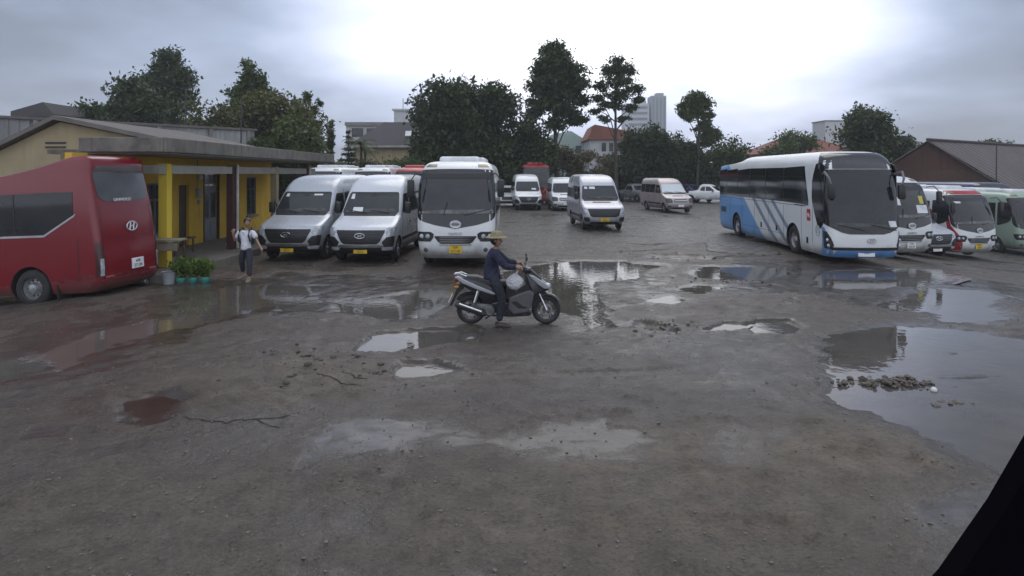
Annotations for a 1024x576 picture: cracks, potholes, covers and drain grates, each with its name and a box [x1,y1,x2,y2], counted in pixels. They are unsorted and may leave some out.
pothole [630,319,682,332]
pothole [105,387,198,427]
pothole [748,321,800,334]
pothole [357,330,481,352]
pothole [709,323,753,331]
pothole [395,364,456,378]
crack [301,372,368,386]
pothole [386,358,464,375]
crack [174,414,290,428]
